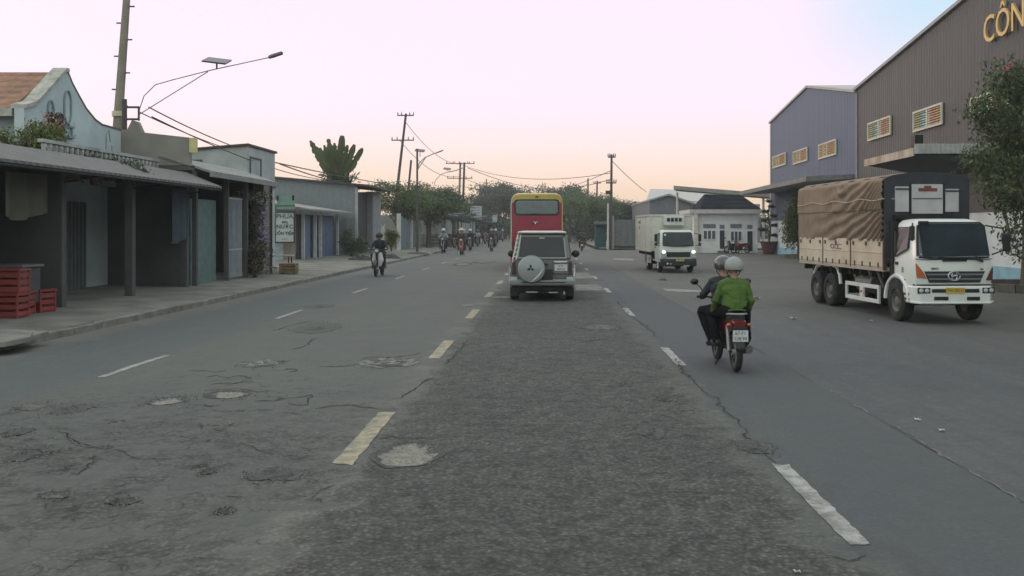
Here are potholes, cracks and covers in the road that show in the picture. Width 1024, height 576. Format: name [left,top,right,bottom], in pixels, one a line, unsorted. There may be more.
pothole [104,493,145,507]
pothole [208,504,237,518]
pothole [33,489,76,503]
pothole [235,466,313,485]
pothole [195,467,217,477]
crack [192,321,381,415]
crack [13,431,166,475]
